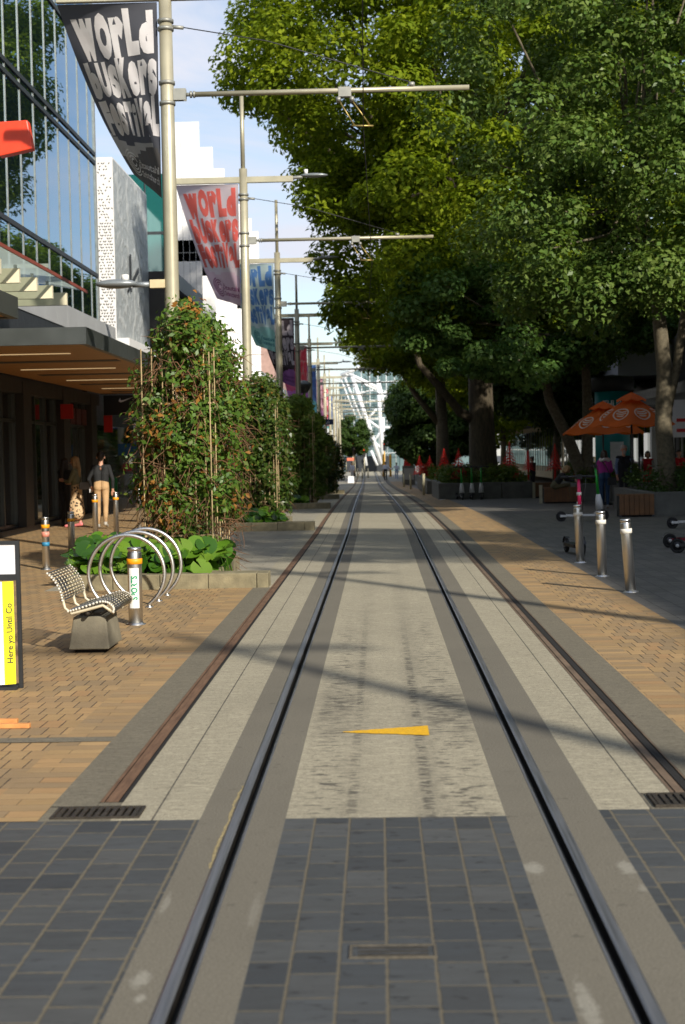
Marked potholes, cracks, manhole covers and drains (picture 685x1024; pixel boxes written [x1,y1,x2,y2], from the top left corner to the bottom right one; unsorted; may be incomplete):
utility cover [349,944,438,959]
drain grate [646,792,685,808]
drain grate [50,805,146,820]
crack [209,786,244,868]
